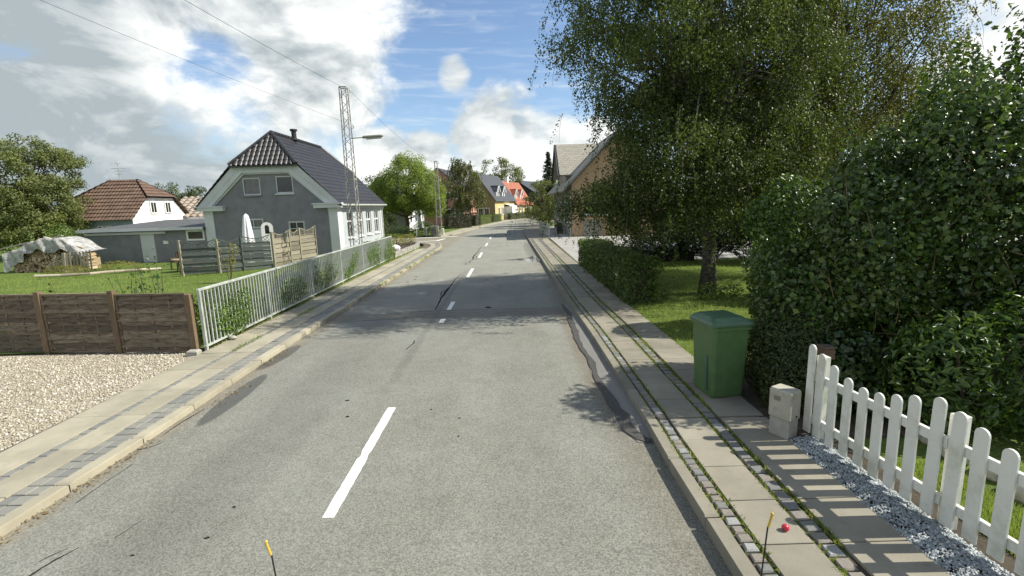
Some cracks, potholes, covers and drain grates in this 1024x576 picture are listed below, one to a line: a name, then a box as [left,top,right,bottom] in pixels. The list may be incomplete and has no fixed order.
crack [421,249,533,312]
crack [29,547,79,576]
